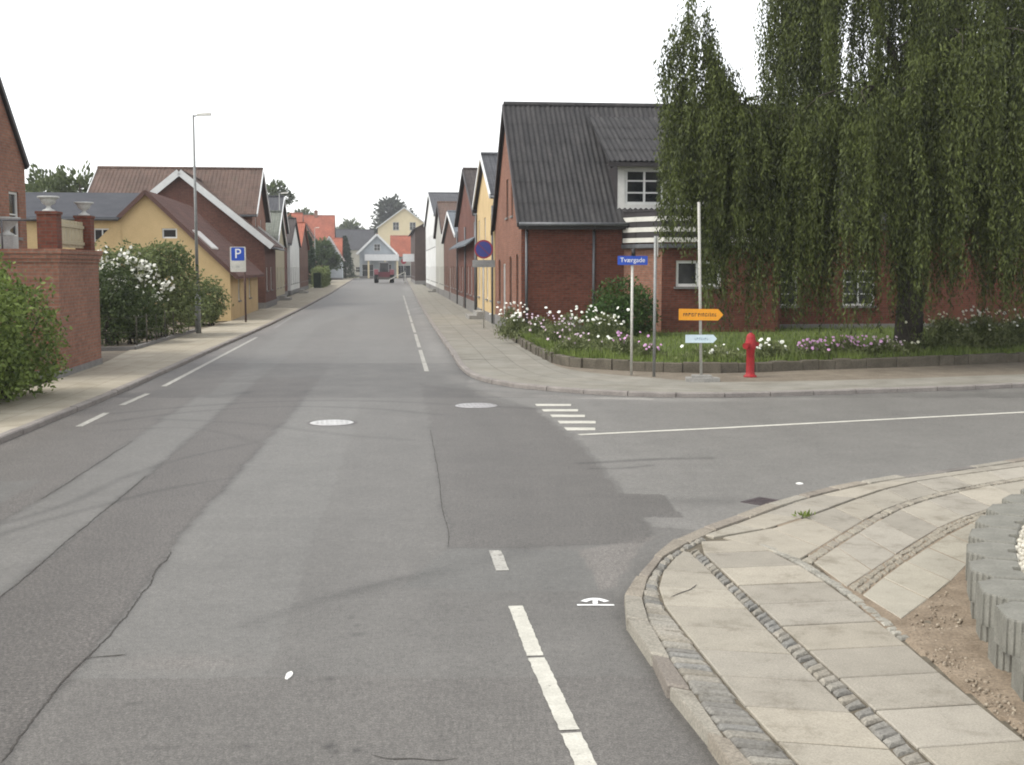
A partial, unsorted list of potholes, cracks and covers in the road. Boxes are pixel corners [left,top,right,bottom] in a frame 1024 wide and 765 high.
drain grate [741,497,778,505]
crack [430,429,449,545]
